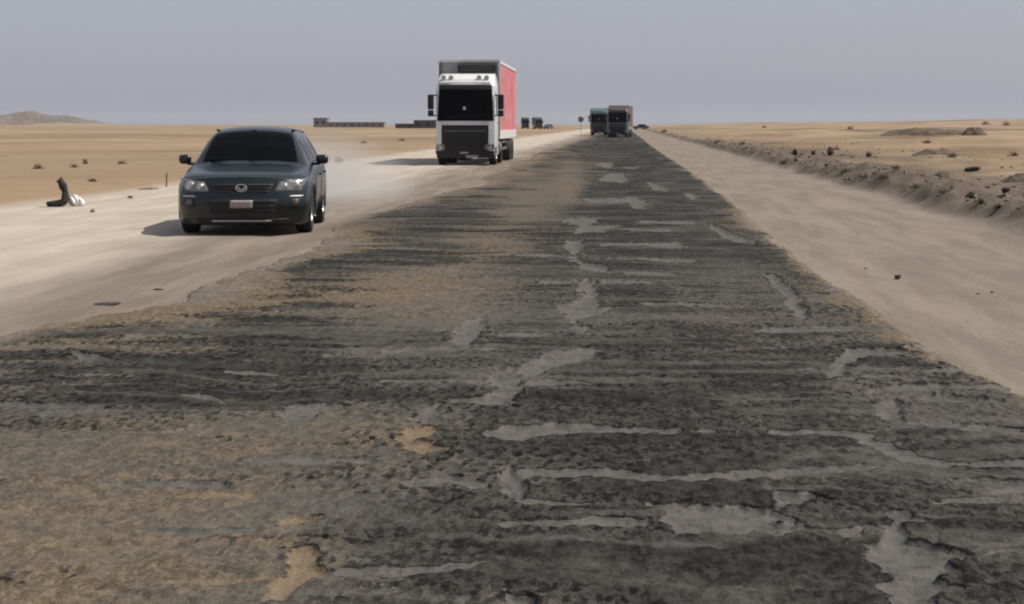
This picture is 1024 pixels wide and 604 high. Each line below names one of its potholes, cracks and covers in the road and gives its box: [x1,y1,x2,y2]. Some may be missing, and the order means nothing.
pothole [854,507,978,604]
pothole [636,489,881,539]
pothole [391,423,453,455]
crack [399,419,1024,529]
